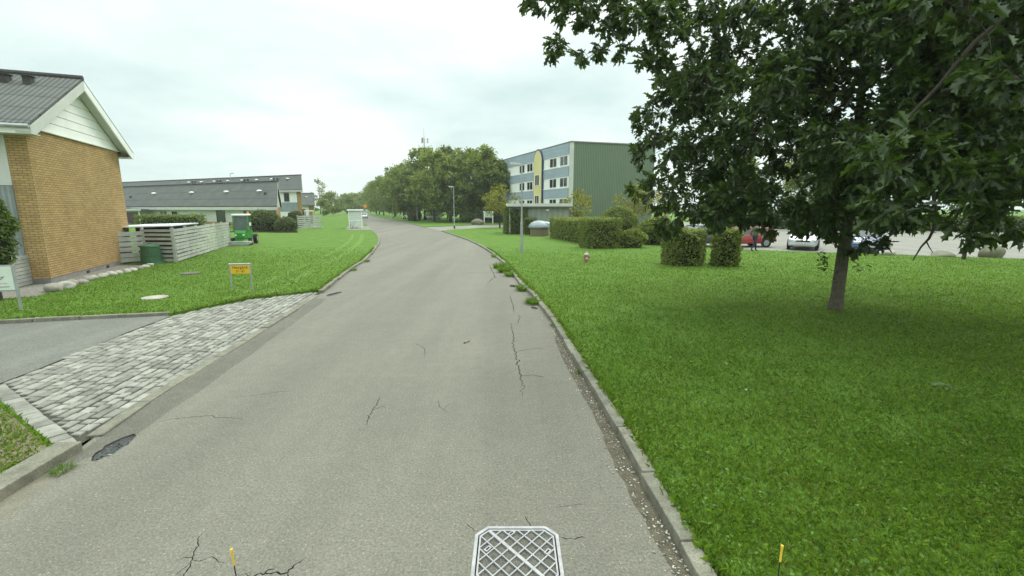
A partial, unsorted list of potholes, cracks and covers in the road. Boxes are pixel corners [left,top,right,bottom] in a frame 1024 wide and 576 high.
crack [242,560,302,576]
crack [177,532,225,576]
pothole [91,434,136,462]
crack [510,291,542,394]
